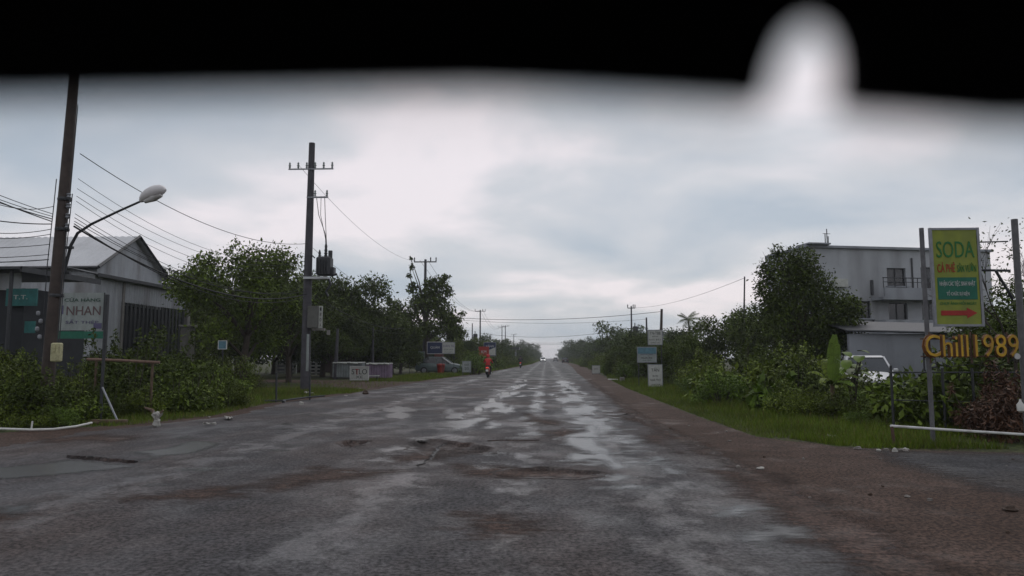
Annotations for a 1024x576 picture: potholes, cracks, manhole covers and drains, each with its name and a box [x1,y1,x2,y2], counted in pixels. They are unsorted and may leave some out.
crack [416,443,449,466]
pothole [403,438,500,457]
pothole [335,439,373,448]
